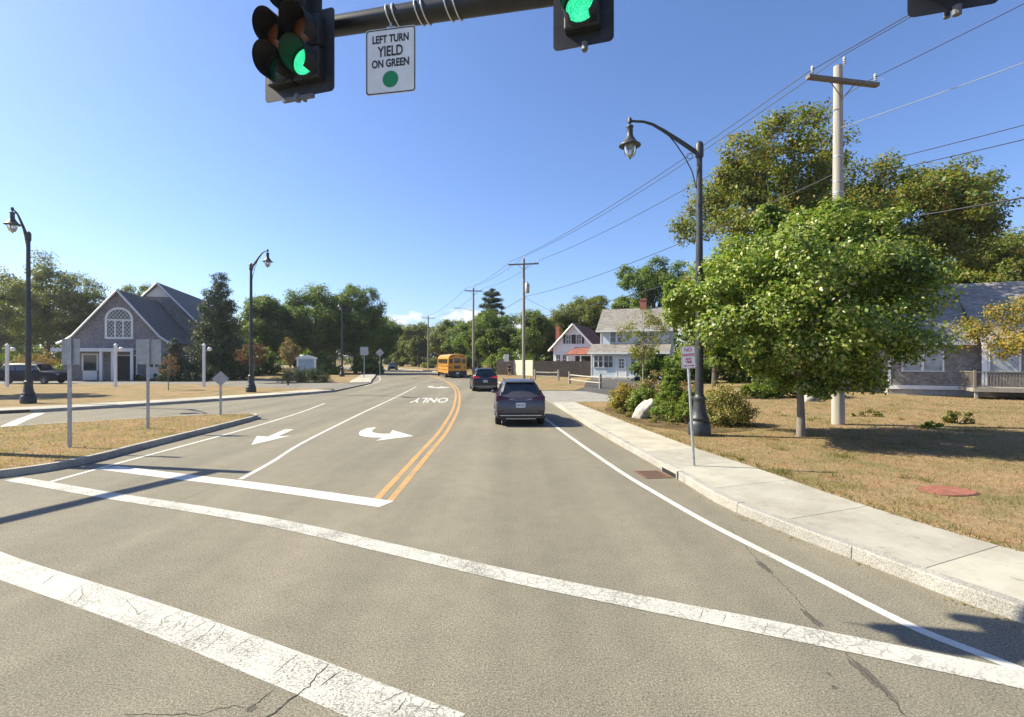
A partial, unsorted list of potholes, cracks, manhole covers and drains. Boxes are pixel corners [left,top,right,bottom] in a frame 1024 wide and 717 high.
drain grate [634,470,673,479]
crack [730,528,907,717]
manhole cover [916,485,980,497]
crack [126,654,340,717]
